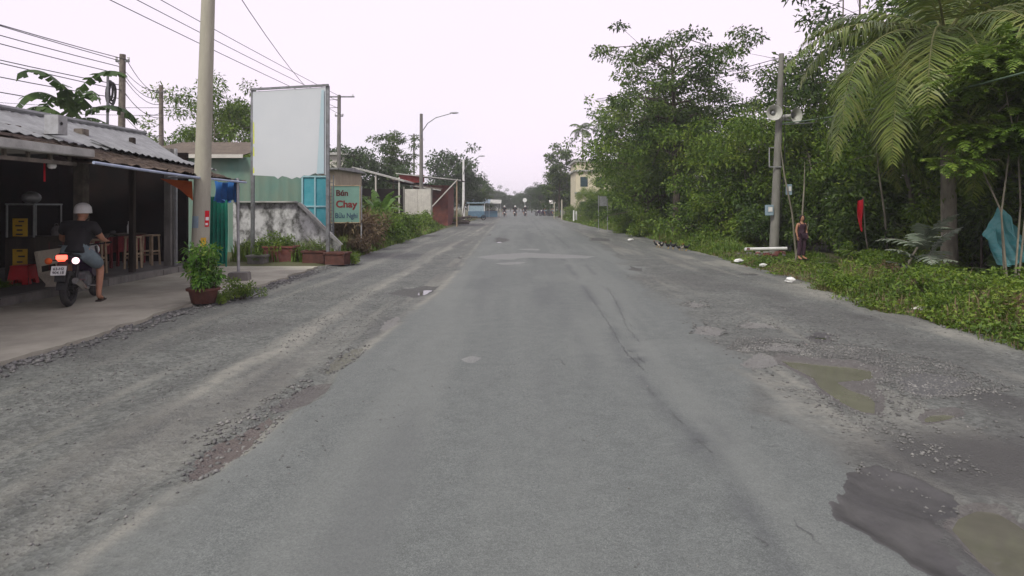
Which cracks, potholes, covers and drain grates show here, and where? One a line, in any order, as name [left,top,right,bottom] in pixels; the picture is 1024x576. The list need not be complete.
pothole [388,286,439,298]
pothole [942,503,1024,576]
pothole [270,383,332,412]
crack [586,290,645,369]
pothole [918,407,966,425]
pothole [773,354,887,415]
pothole [189,418,273,481]
